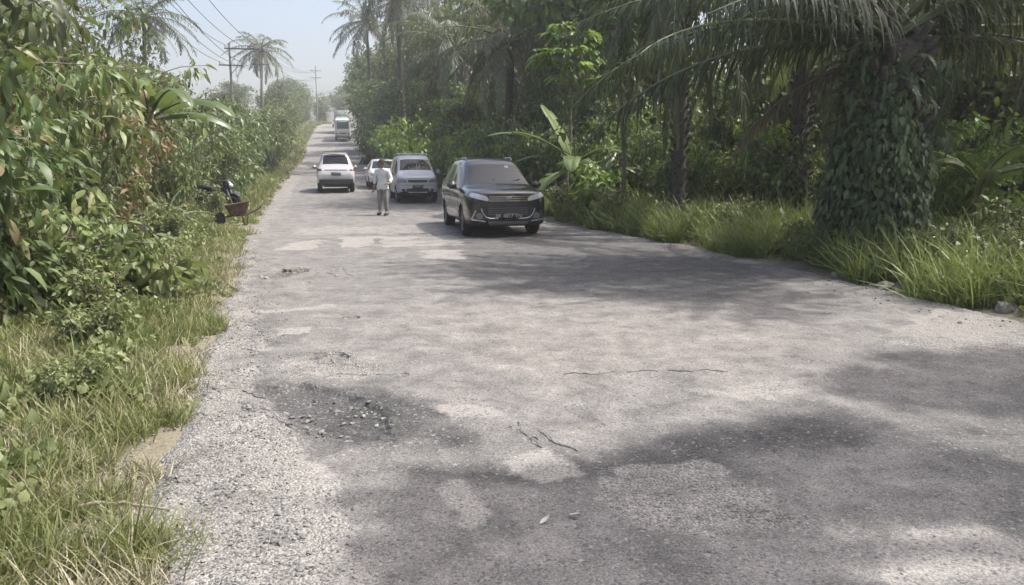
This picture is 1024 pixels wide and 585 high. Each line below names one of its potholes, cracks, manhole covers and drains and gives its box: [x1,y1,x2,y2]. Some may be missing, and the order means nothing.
crack [517,422,578,452]
pothole [299,351,355,368]
pothole [257,380,400,463]
